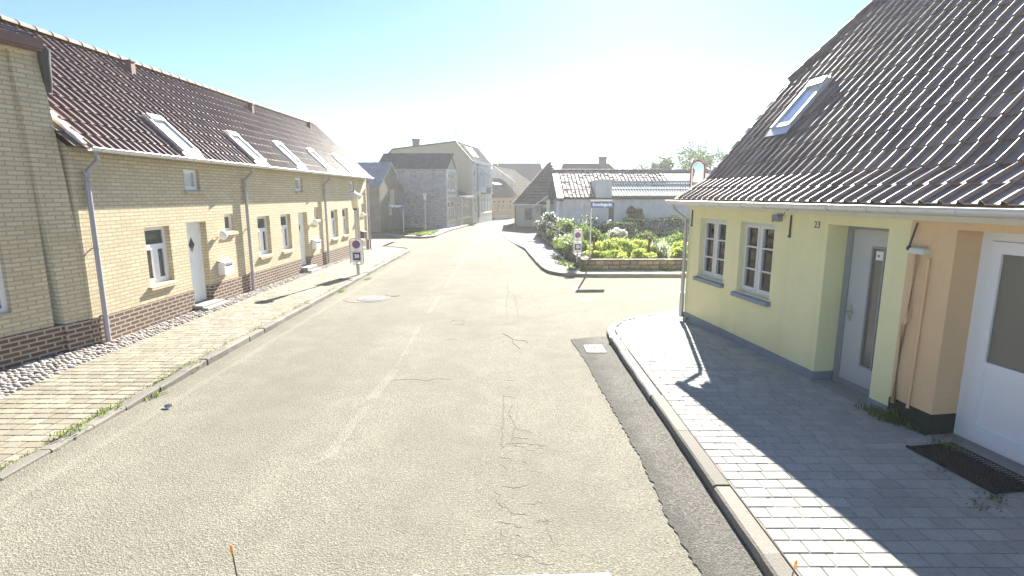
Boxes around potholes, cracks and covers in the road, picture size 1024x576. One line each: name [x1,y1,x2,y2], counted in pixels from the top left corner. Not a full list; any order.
crack [500,278,528,349]
crack [494,380,552,565]
